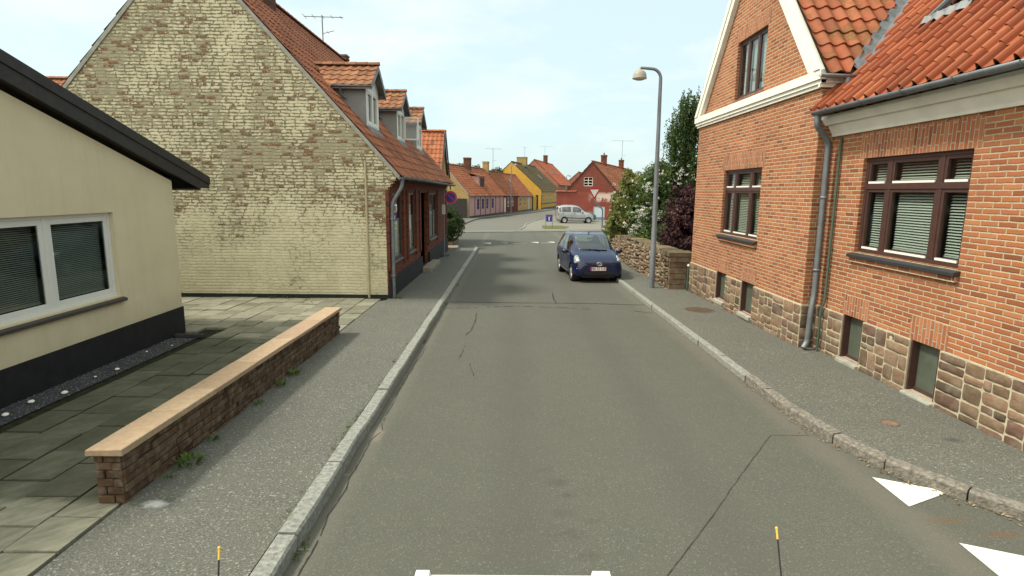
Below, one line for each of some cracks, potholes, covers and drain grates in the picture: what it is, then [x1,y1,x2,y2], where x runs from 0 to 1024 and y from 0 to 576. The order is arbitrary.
manhole cover [880,419,900,427]
crack [460,293,651,376]
